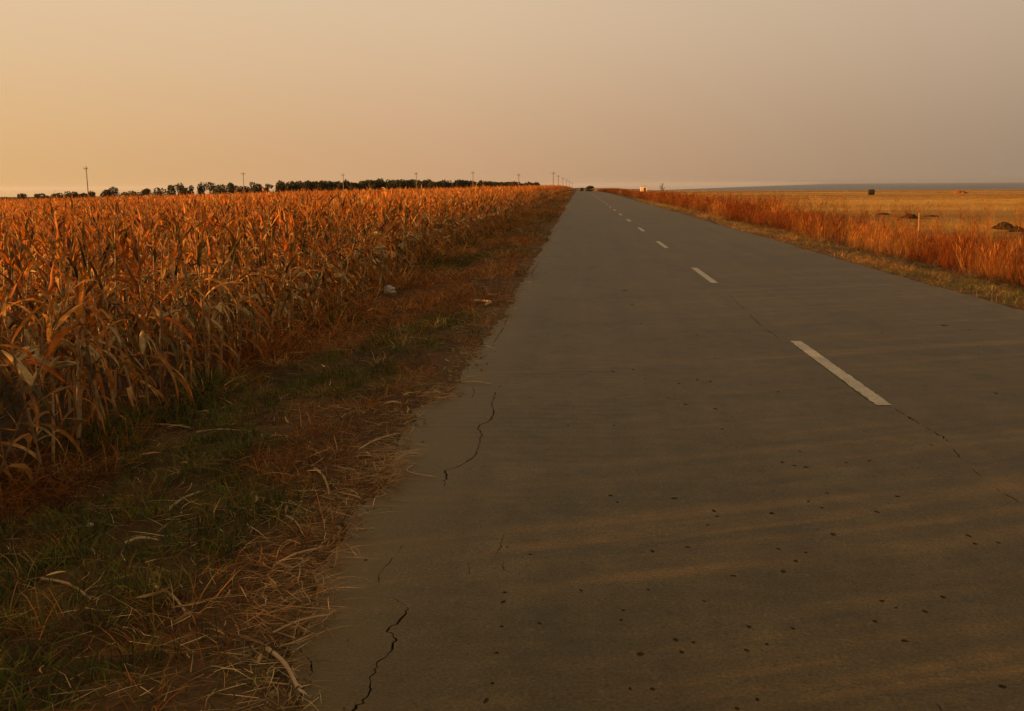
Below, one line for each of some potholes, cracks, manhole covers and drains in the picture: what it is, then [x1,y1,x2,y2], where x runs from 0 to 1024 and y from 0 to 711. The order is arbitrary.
crack [443,385,501,485]
crack [351,544,409,711]
